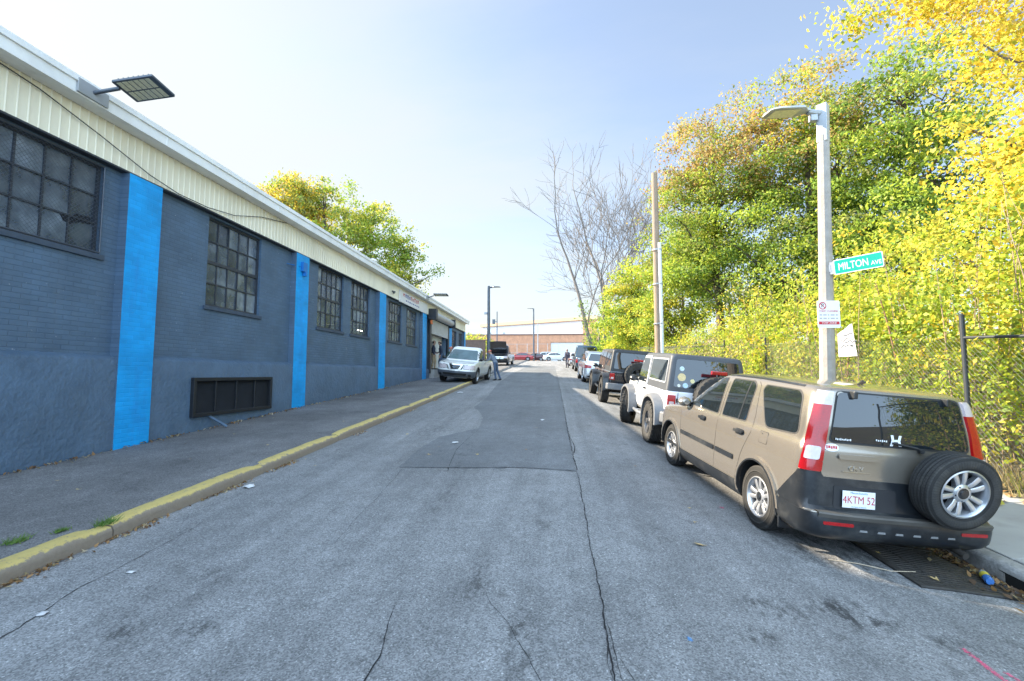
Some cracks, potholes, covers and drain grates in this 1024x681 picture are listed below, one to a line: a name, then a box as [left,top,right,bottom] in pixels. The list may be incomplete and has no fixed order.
drain grate [850,541,1024,602]
crack [363,605,395,681]
crack [0,522,202,638]
crack [448,376,634,681]
